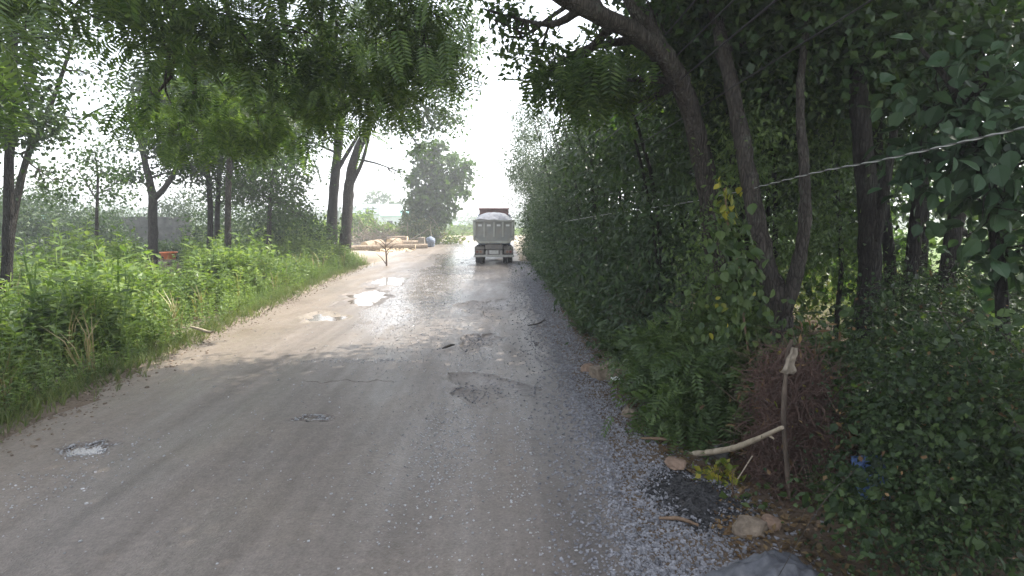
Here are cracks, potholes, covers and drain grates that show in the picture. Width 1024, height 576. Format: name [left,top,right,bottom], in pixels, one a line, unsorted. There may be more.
pothole [287,414,335,422]
pothole [443,370,552,407]
pothole [457,332,508,355]
pothole [53,438,124,459]
